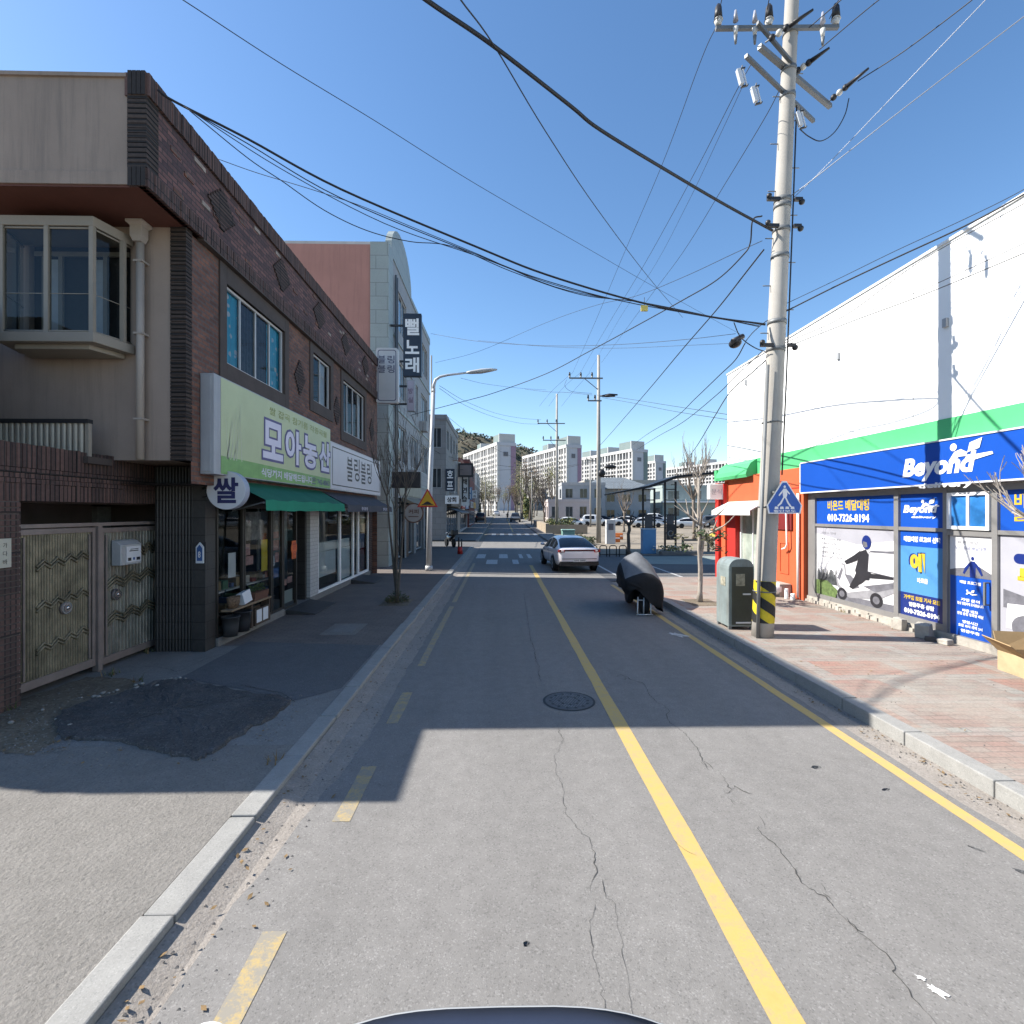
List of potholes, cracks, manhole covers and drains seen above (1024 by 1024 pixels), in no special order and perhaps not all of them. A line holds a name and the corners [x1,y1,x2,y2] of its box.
crack [555,725,633,1014]
manhole cover [543,692,595,711]
crack [623,675,751,803]
crack [757,817,936,1023]
